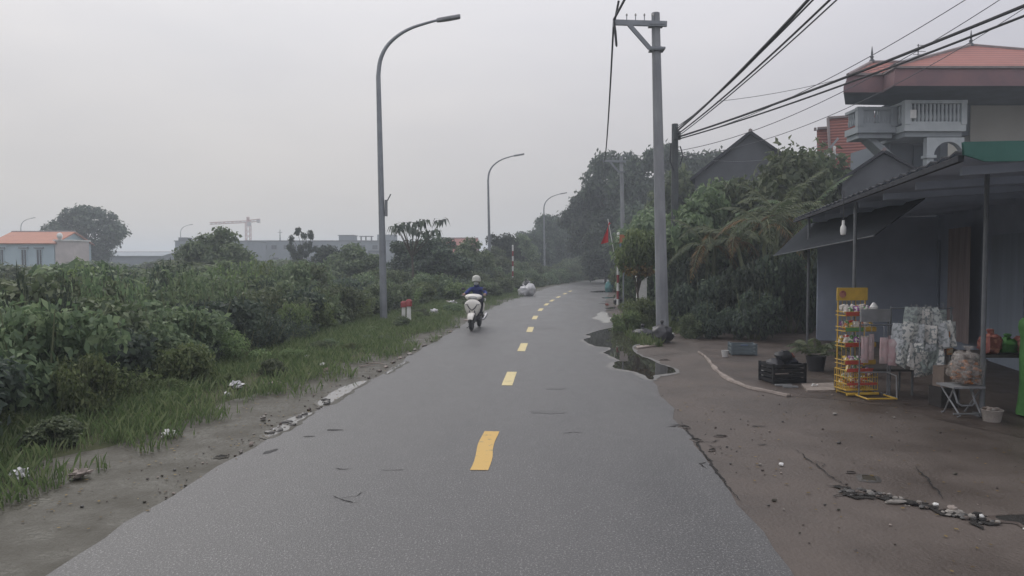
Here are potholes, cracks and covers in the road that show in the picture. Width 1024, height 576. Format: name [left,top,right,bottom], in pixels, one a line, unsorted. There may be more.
crack [797,450,1002,529]
crack [668,421,742,502]
